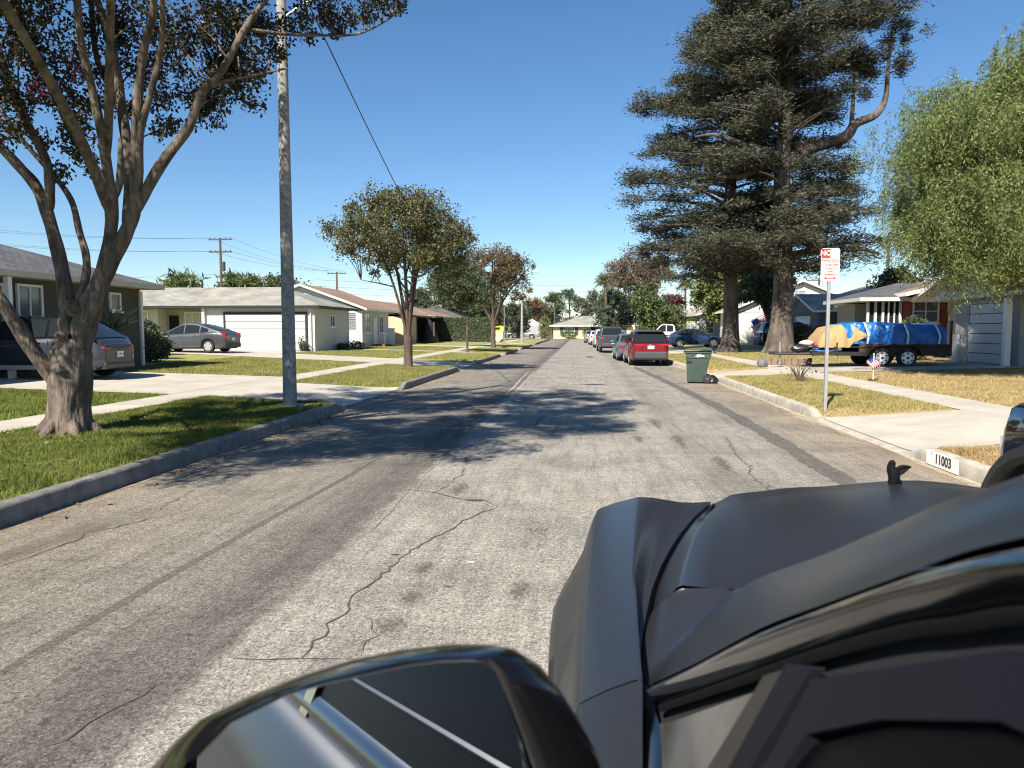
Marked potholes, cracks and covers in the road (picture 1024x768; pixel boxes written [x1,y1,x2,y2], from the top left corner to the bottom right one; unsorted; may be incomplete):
crack [726,437,771,490]
crack [20,680,163,757]
crack [1,490,283,566]
crack [68,450,579,660]
